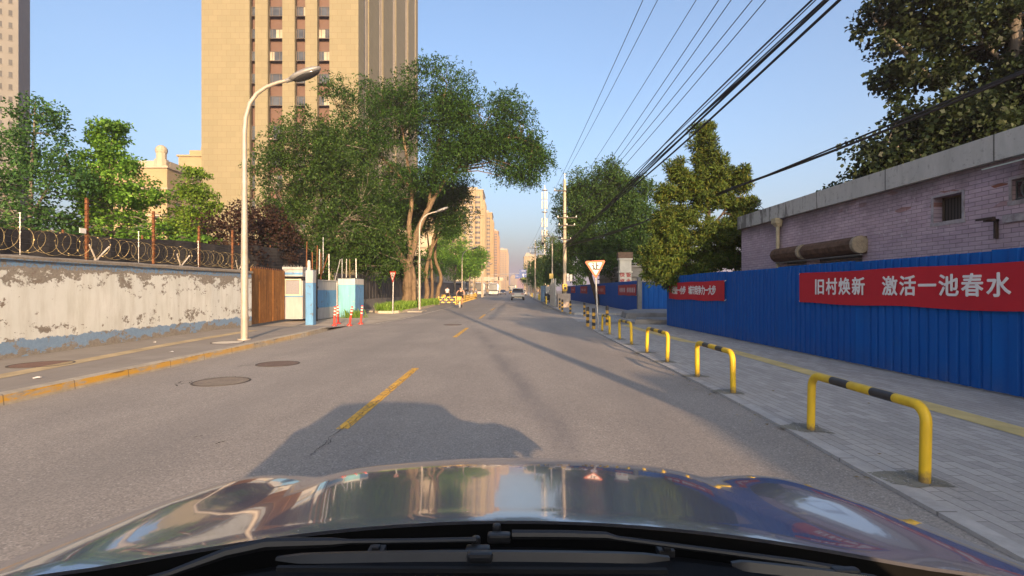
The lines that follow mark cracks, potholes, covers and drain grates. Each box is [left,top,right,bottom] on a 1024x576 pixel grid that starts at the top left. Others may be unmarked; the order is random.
manhole cover [190,377,251,387]
manhole cover [5,360,76,368]
